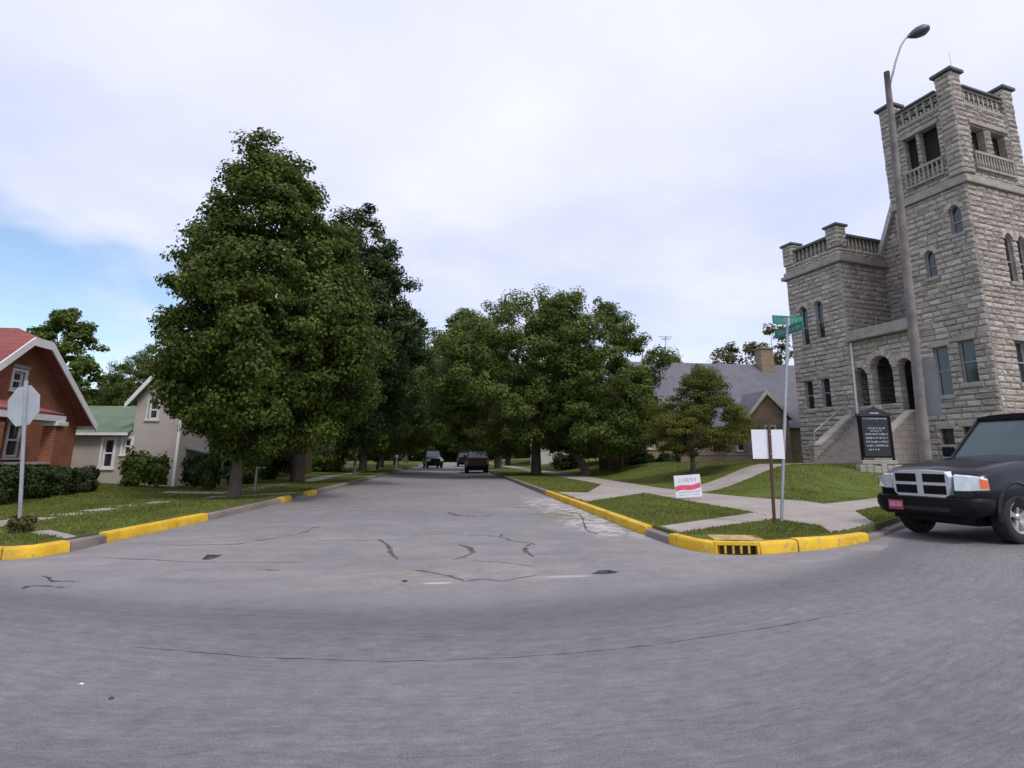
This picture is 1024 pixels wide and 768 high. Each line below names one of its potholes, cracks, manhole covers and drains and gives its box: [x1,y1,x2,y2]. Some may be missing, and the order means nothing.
crack [21,576,77,590]
crack [128,609,870,662]
crack [415,534,537,582]
crack [100,510,398,571]
drain grate [707,535,765,555]
